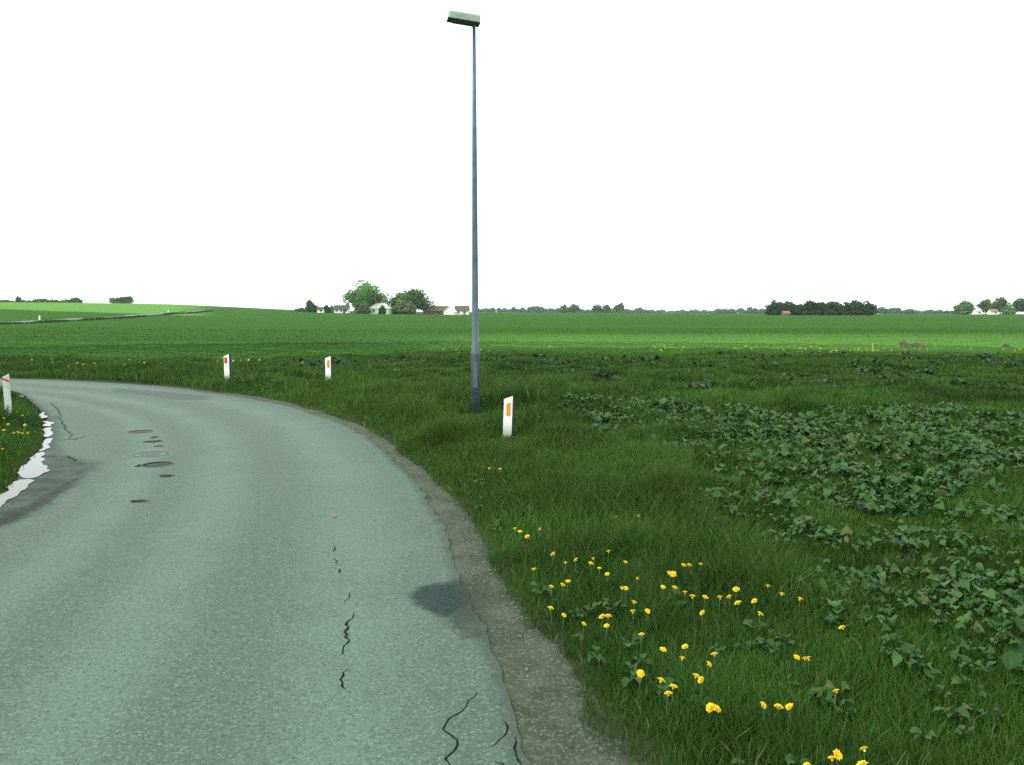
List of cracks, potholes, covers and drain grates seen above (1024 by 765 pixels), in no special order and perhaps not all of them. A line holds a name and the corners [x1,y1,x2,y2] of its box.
crack [50,402,85,462]
crack [338,593,354,689]
crack [442,693,523,765]
